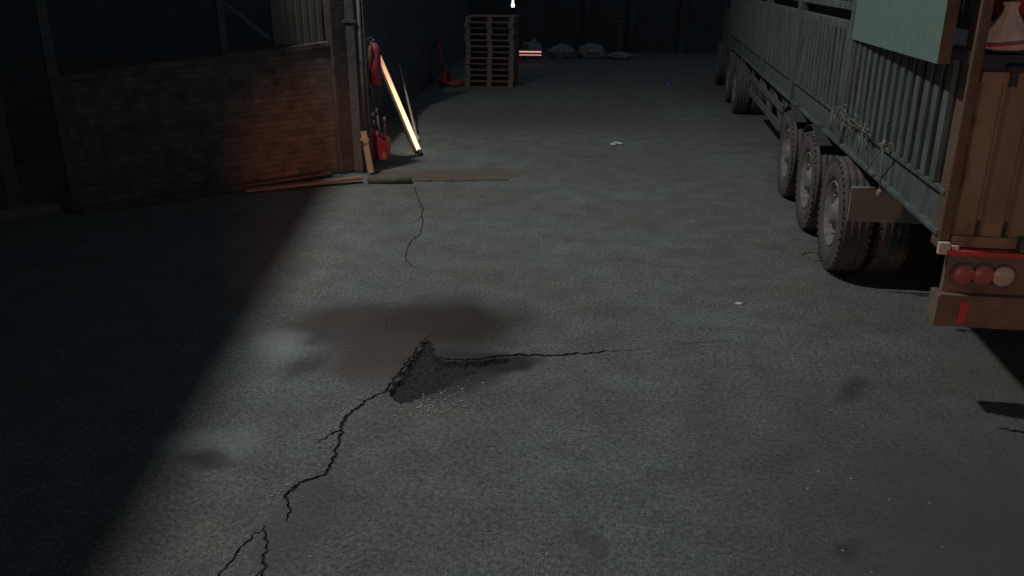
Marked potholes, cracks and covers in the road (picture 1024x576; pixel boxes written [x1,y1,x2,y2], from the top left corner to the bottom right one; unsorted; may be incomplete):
pothole [389,339,510,404]
crack [218,334,730,576]
crack [405,187,428,268]
